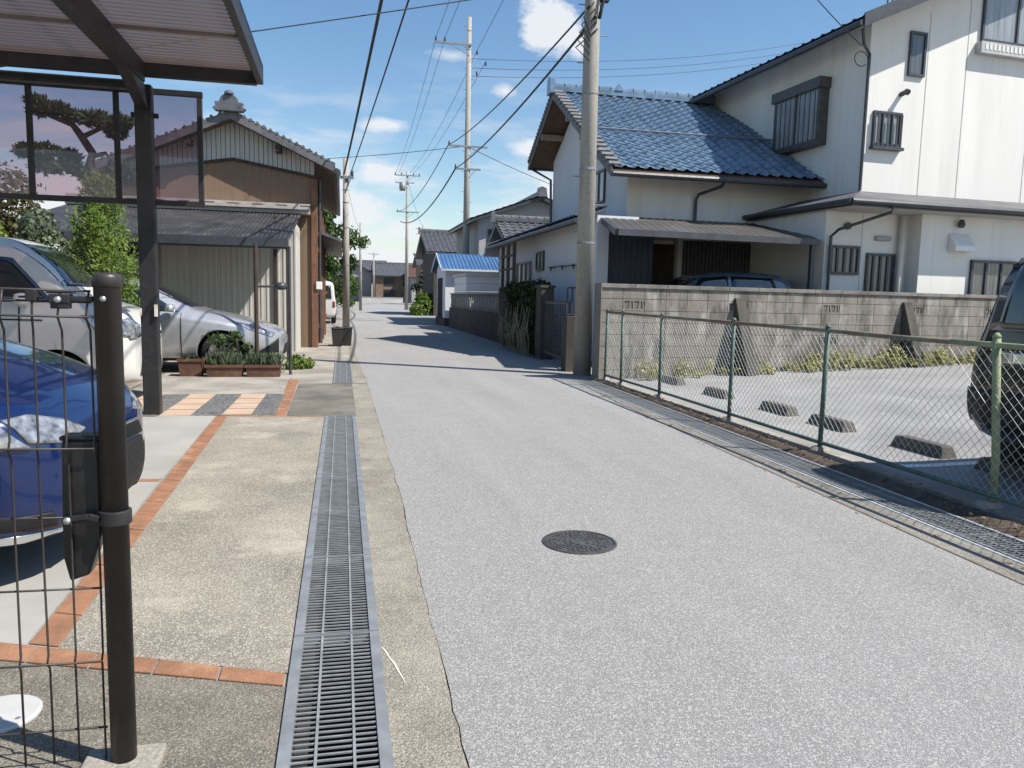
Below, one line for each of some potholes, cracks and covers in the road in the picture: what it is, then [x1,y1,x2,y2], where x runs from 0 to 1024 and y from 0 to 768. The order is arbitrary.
drain grate [323,416,357,431]
drain grate [276,631,394,768]
drain grate [320,430,359,450]
drain grate [312,473,365,508]
manhole cover [542,530,617,555]
drain grate [305,506,371,557]
drain grate [294,554,379,637]
drain grate [317,449,362,474]
